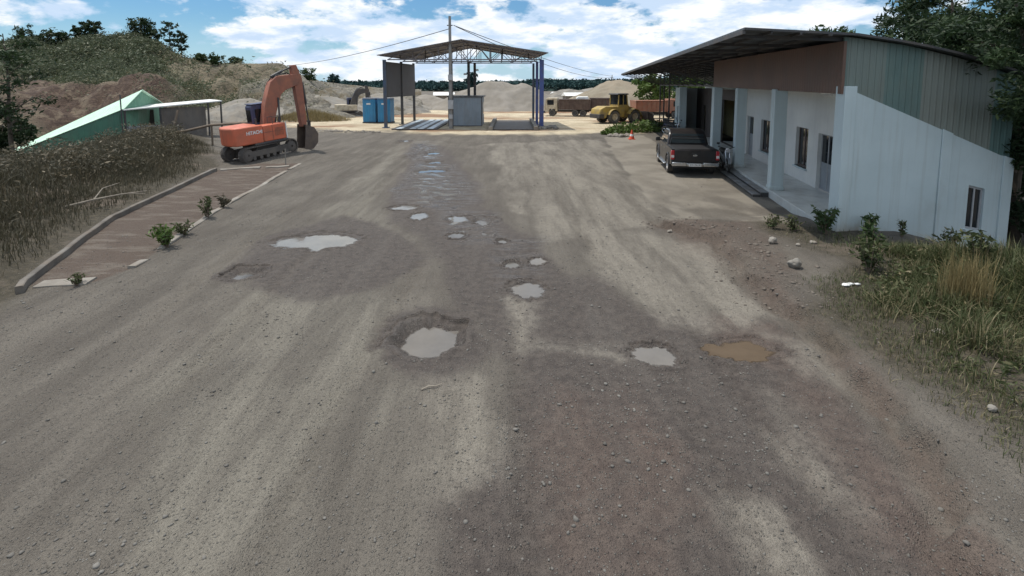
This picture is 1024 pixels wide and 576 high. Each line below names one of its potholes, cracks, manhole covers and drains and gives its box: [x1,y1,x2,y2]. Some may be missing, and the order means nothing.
pothole [524,255,551,266]
pothole [441,214,476,223]
pothole [499,258,524,269]
pothole [616,338,690,372]
pothole [466,214,503,227]
pothole [404,211,434,222]
pothole [364,307,480,370]
pothole [442,232,471,240]
pothole [497,275,556,303]
pothole [210,263,279,283]
pothole [380,203,424,211]
pothole [250,229,379,254]
